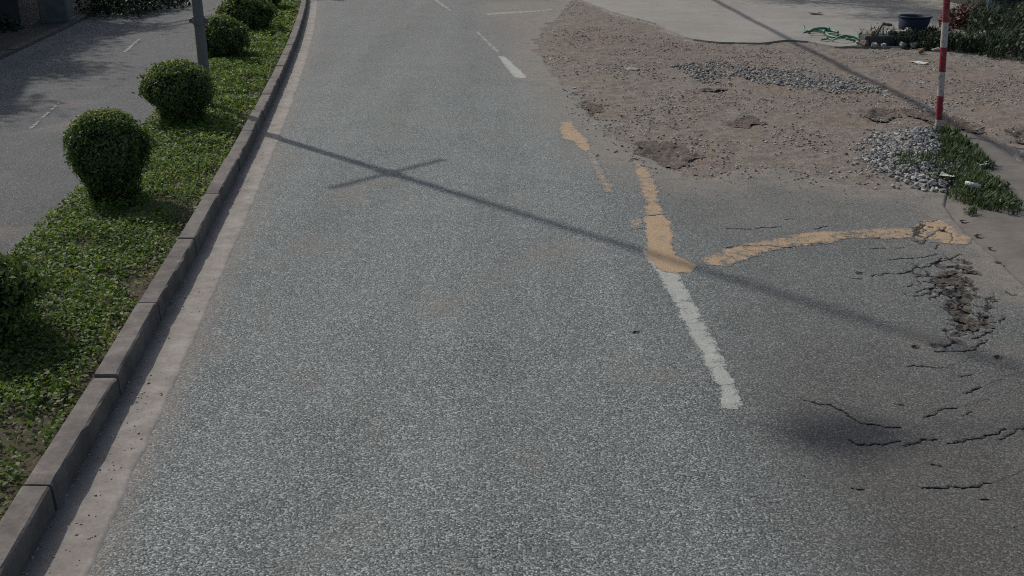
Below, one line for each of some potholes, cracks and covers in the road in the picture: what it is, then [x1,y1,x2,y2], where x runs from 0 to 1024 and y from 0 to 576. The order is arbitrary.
crack [801,398,1024,446]
crack [846,220,1016,418]
crack [922,469,1024,501]
